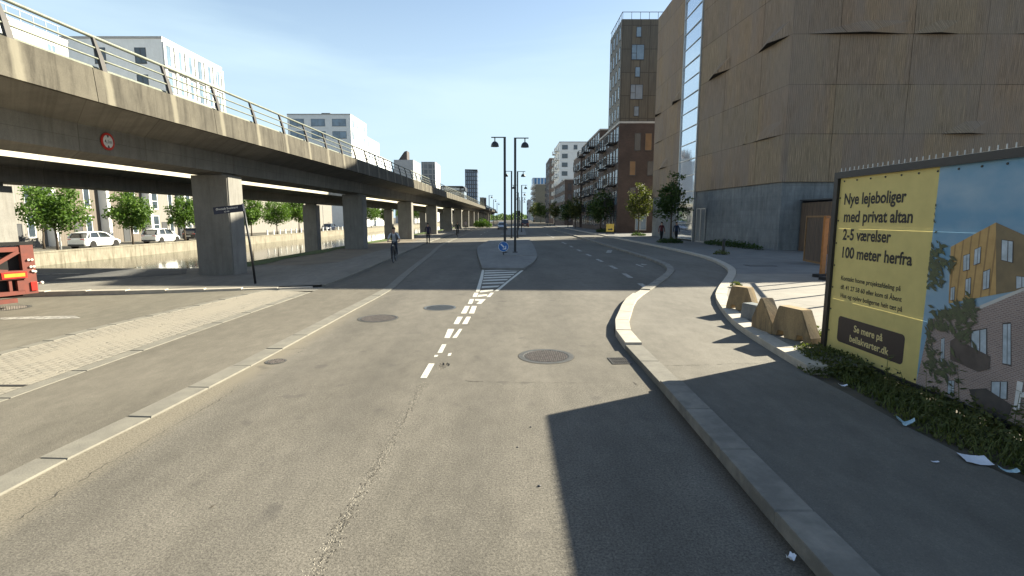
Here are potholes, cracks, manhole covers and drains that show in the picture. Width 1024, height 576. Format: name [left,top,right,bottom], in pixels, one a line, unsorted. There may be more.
manhole cover [357,314,399,322]
manhole cover [518,349,575,364]
crack [301,382,427,576]
